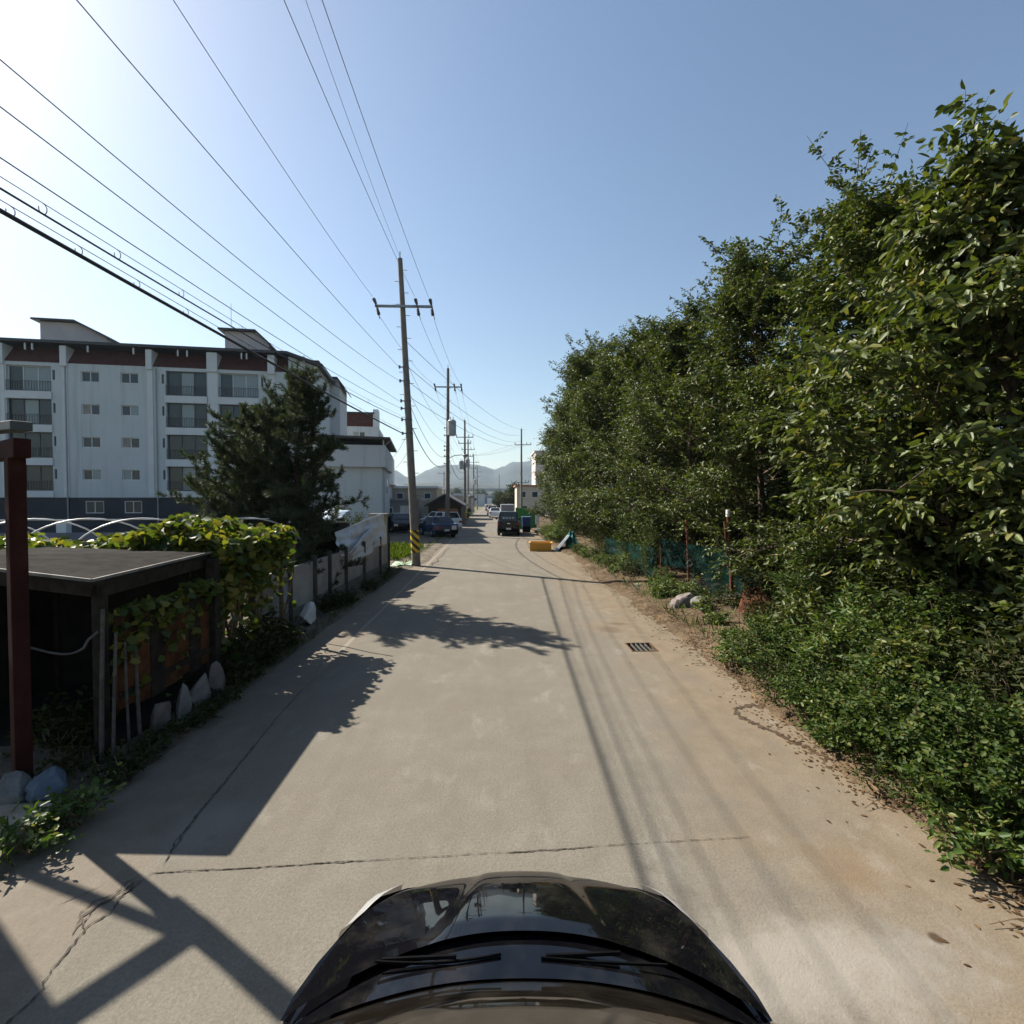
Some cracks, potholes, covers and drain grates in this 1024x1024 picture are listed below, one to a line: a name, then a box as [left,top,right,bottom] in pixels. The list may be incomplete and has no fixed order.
drain grate [625,643,658,652]
